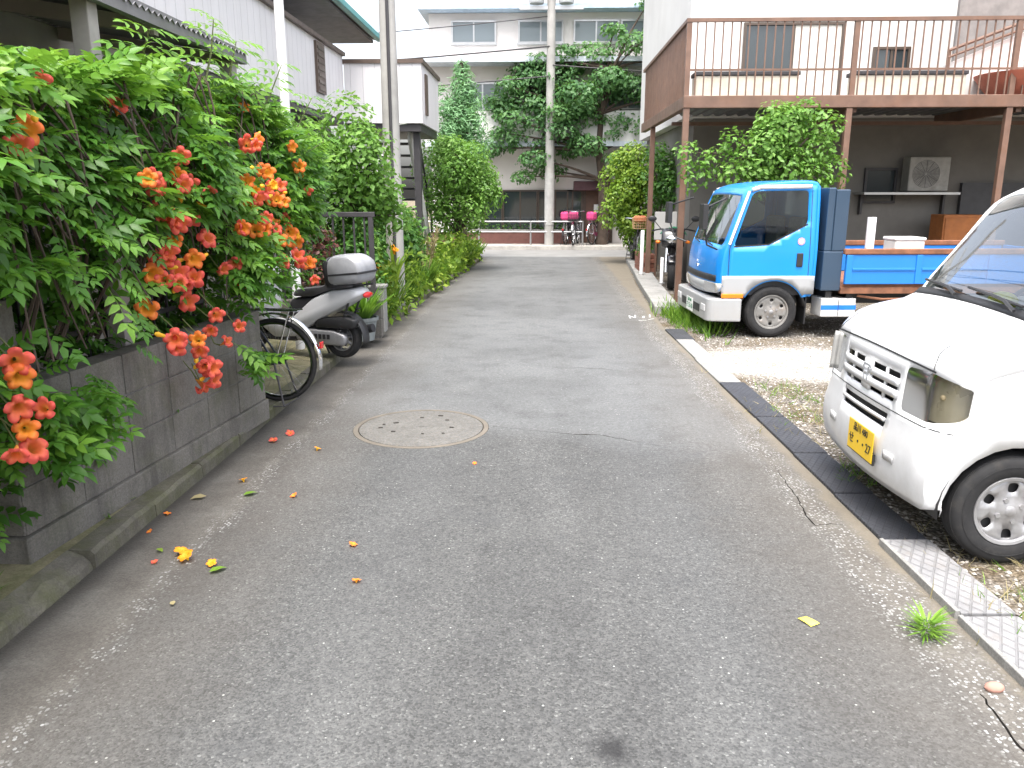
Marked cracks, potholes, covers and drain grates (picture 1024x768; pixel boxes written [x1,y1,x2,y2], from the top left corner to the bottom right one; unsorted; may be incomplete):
manhole cover [353,410,489,449]
crack [775,467,838,526]
crack [980,694,1024,752]
